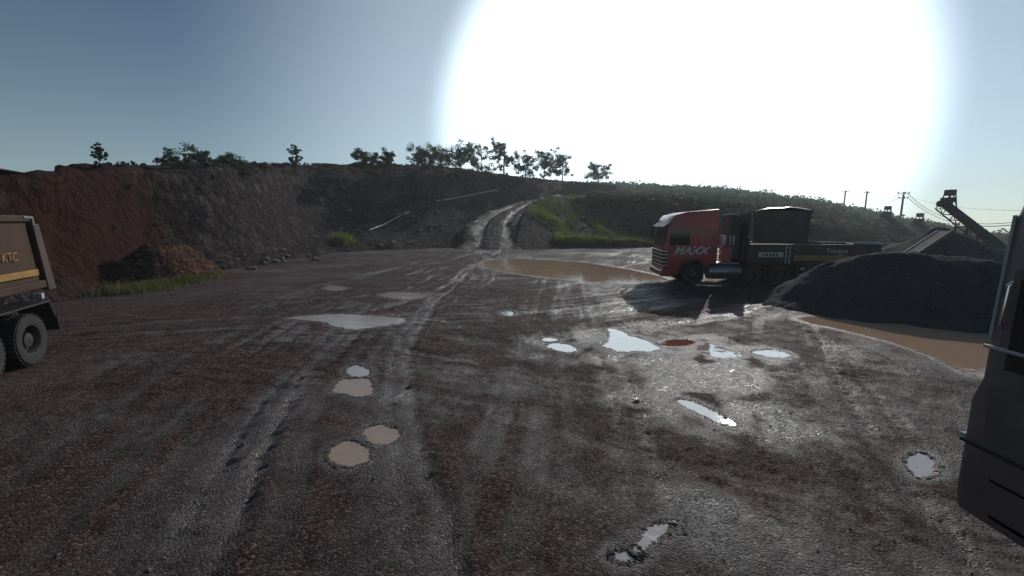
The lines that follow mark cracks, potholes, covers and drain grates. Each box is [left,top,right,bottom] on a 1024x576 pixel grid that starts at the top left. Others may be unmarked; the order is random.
pothole [627,519,678,558]
pothole [285,313,409,330]
pothole [543,342,580,353]
pothole [328,377,378,398]
pothole [899,450,941,479]
pothole [600,328,664,353]
pothole [322,438,375,469]
pothole [357,422,405,445]
pothole [655,338,698,347]
pothole [748,348,794,358]
pothole [605,544,645,567]
pothole [672,397,743,427]
